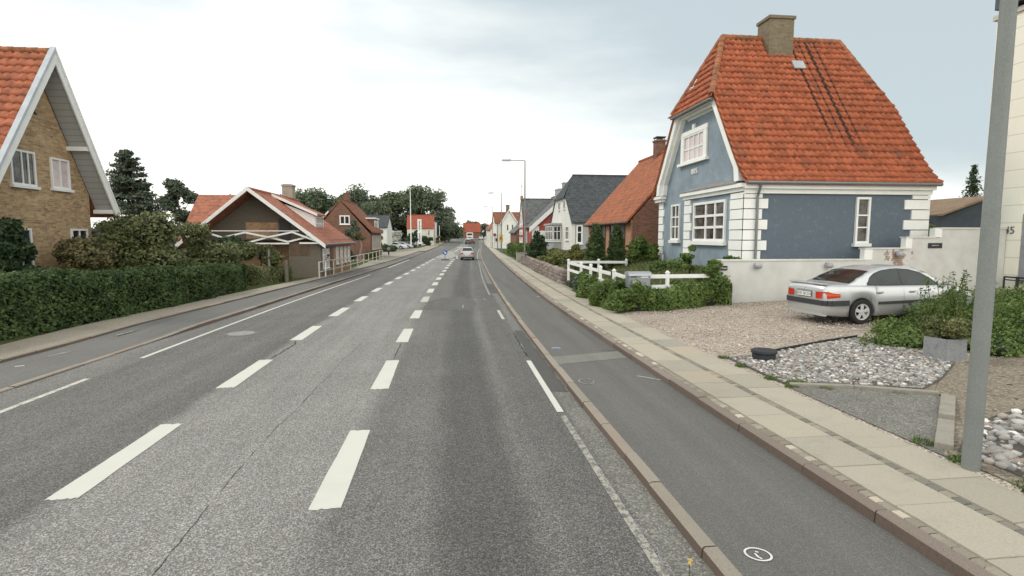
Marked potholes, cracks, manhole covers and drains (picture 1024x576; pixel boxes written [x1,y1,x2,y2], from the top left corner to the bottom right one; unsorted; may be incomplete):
crack [151,350,354,576]
